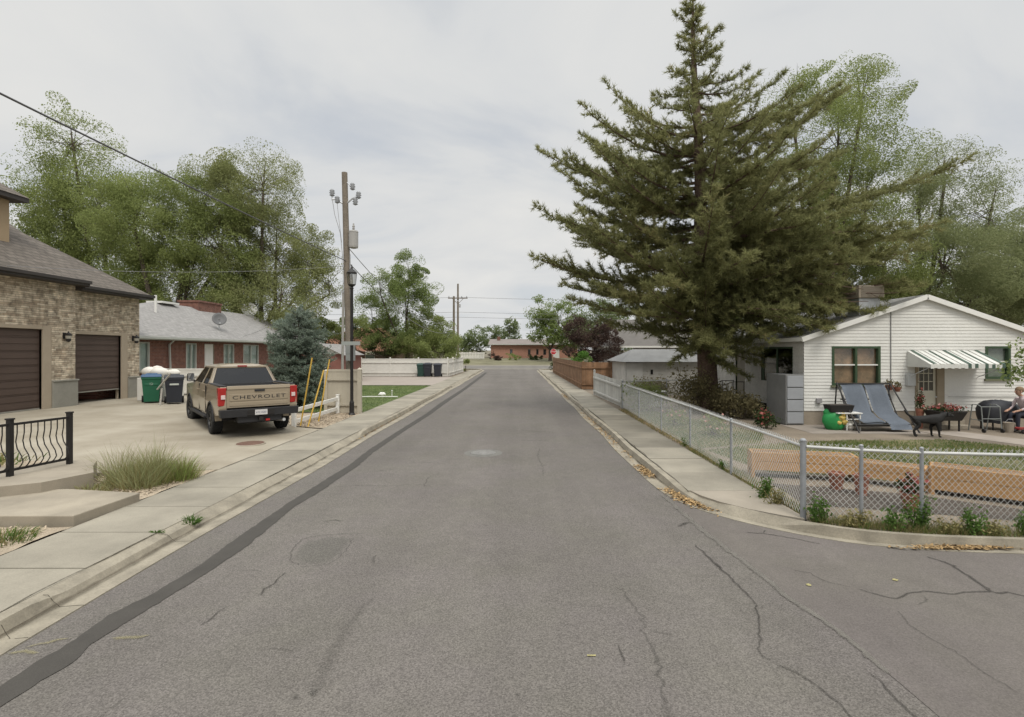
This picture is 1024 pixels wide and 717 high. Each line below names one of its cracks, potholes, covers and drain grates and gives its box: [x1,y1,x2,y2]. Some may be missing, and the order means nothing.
manhole cover [464,449,502,457]
crack [696,546,849,714]
crack [870,589,1024,598]
